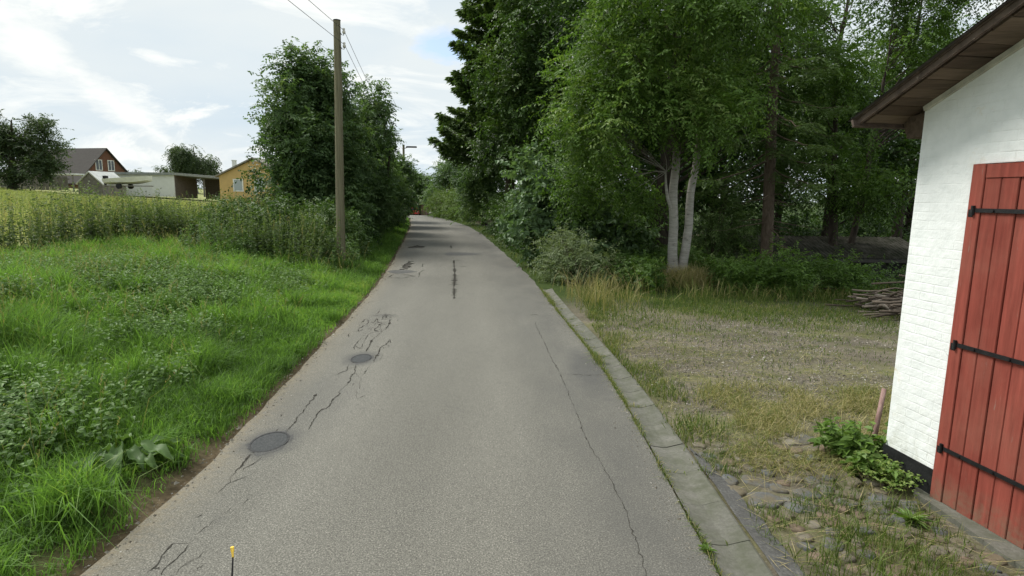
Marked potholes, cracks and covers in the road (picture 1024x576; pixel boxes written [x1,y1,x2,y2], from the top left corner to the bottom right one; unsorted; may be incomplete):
crack [534,314,646,571]
crack [276,310,398,431]
manhole cover [245,430,294,456]
crack [151,453,258,574]
manhole cover [348,354,374,364]
